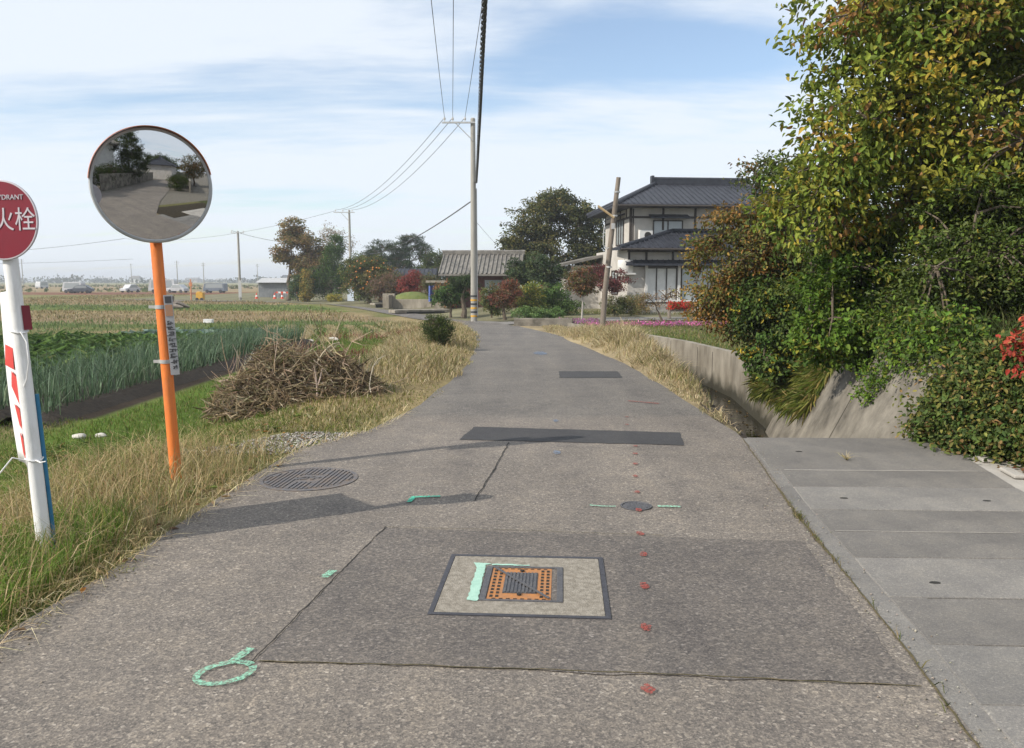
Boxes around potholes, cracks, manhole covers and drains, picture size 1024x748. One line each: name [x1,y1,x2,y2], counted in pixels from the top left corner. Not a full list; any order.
manhole cover [620,501,652,511]
crack [247,437,980,748]
manhole cover [427,554,611,620]
